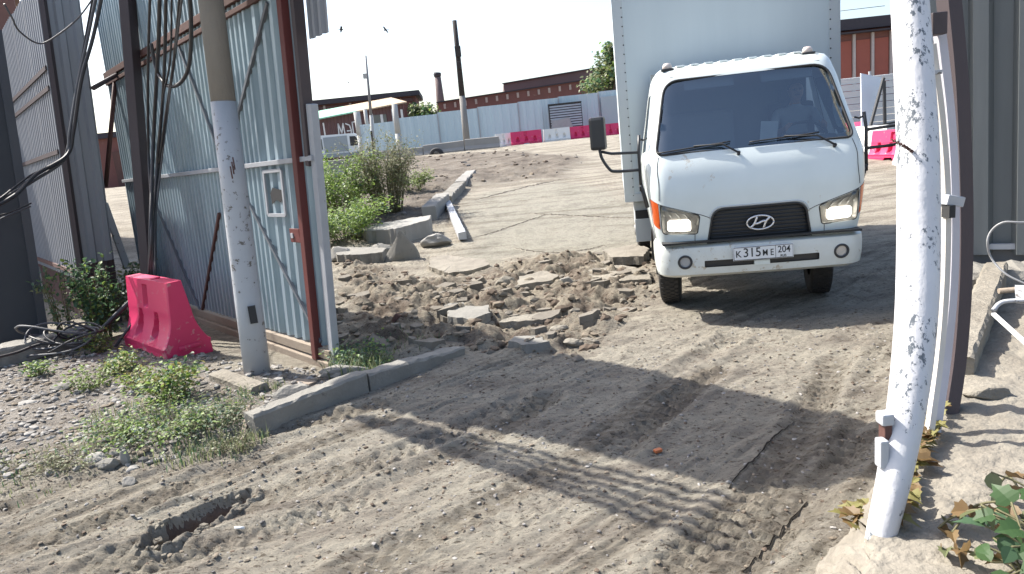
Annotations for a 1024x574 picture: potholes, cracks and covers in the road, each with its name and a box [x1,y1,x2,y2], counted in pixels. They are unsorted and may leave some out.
pothole [128,485,264,562]
crack [729,421,808,573]
crack [457,179,605,254]
